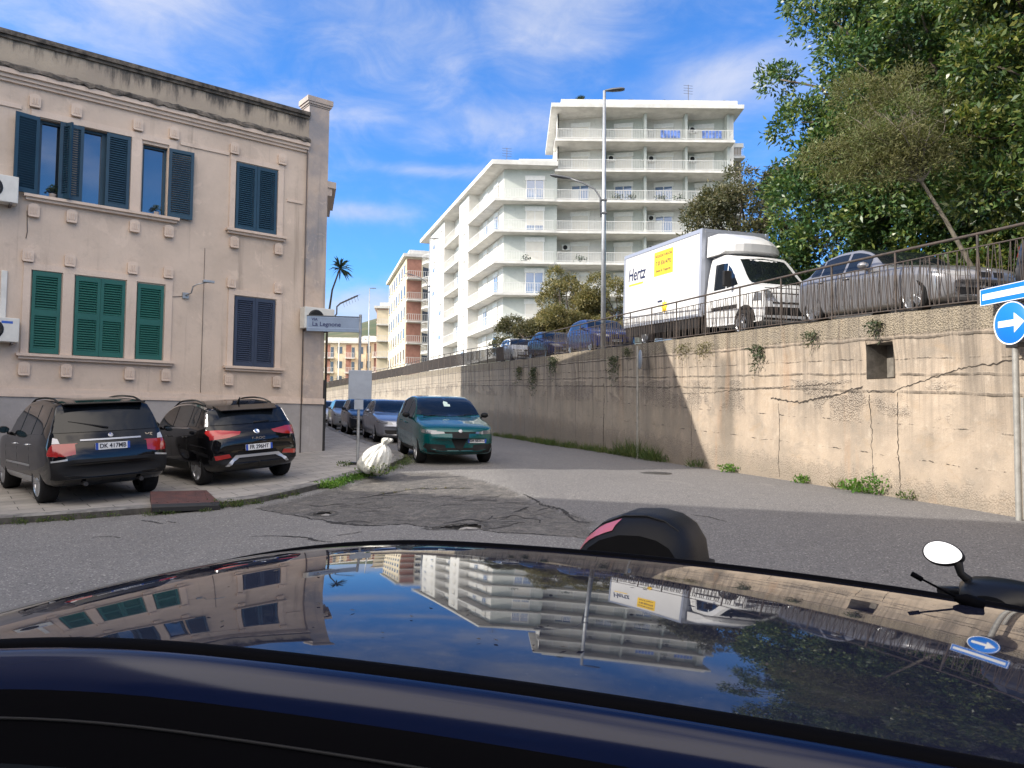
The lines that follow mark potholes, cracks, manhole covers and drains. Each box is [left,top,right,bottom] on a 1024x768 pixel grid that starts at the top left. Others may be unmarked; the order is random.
crack [257,486,589,542]
